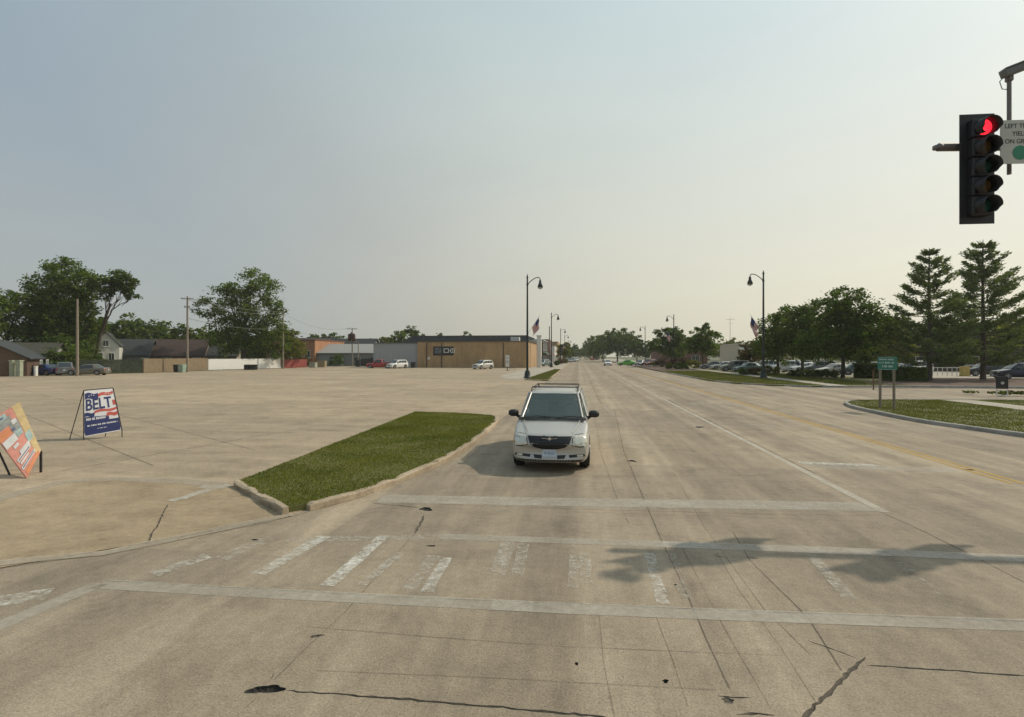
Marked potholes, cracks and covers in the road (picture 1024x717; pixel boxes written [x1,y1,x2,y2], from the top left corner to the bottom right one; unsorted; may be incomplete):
crack [373,503,439,533]
pothole [244,685,286,693]
crack [802,641,1024,717]
crack [246,673,605,717]
crack [147,505,168,545]
